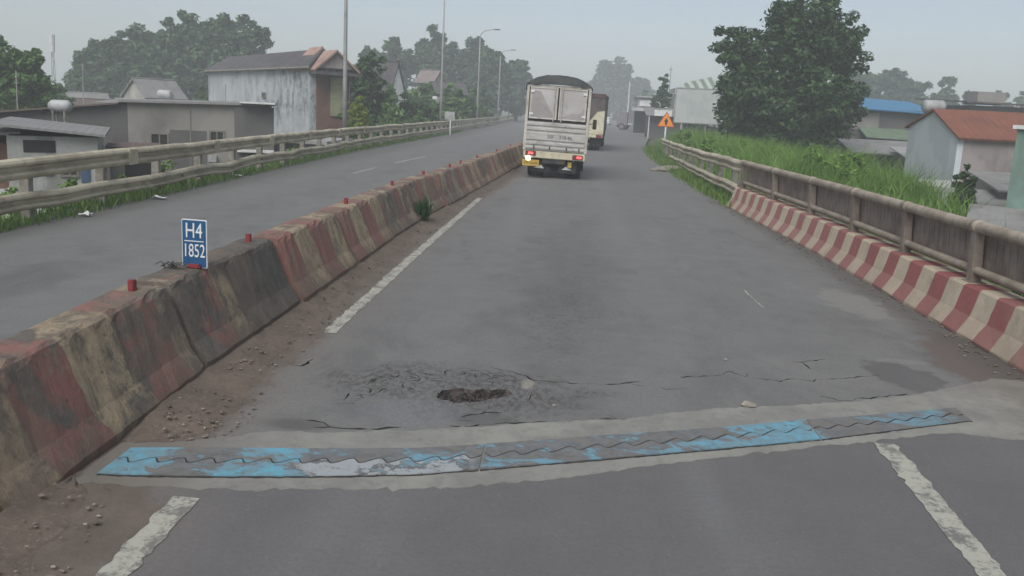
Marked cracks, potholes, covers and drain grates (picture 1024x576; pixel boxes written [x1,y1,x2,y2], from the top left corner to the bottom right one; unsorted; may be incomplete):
crack [662,359,907,401]
crack [342,368,639,404]
pothole [437,388,512,404]
